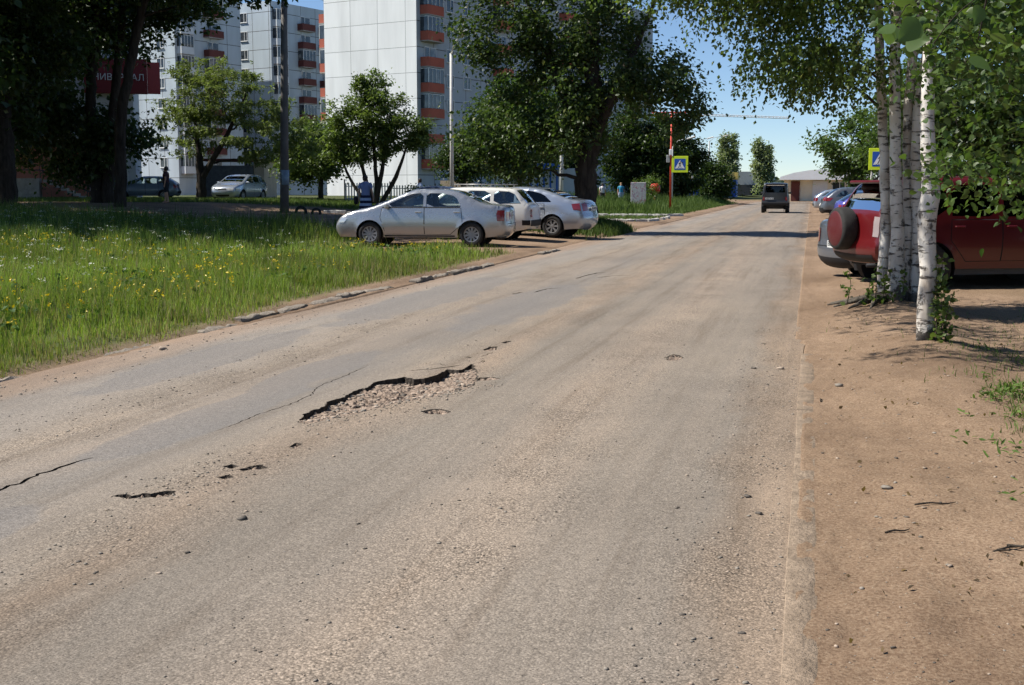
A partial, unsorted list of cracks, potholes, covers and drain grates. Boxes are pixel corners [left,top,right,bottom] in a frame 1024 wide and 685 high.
pothole [298,363,480,424]
crack [0,457,93,491]
crack [213,367,364,432]
pothole [115,491,176,499]
